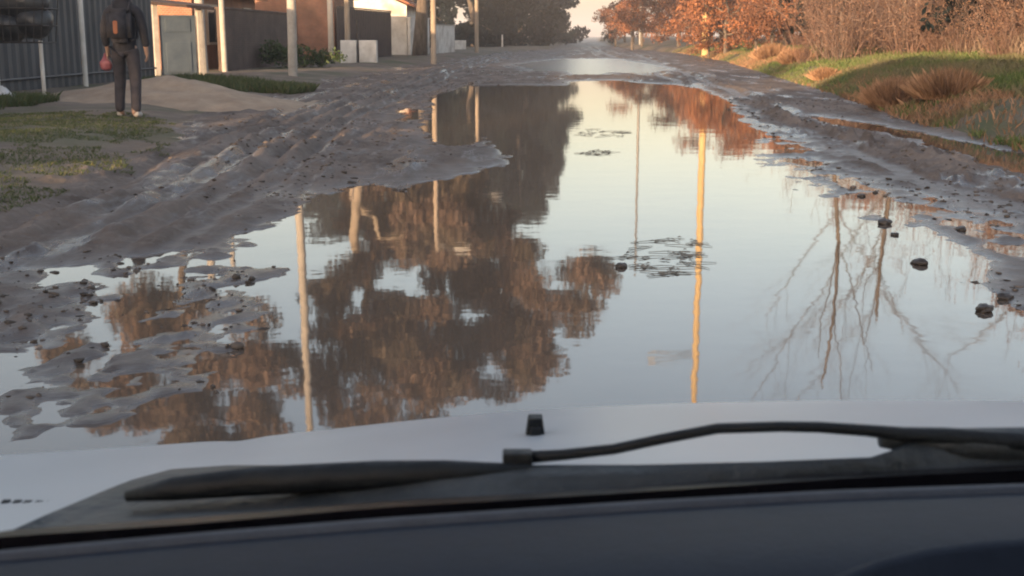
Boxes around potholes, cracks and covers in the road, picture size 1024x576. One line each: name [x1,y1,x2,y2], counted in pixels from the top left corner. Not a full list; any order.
pothole [0,80,1024,455]
